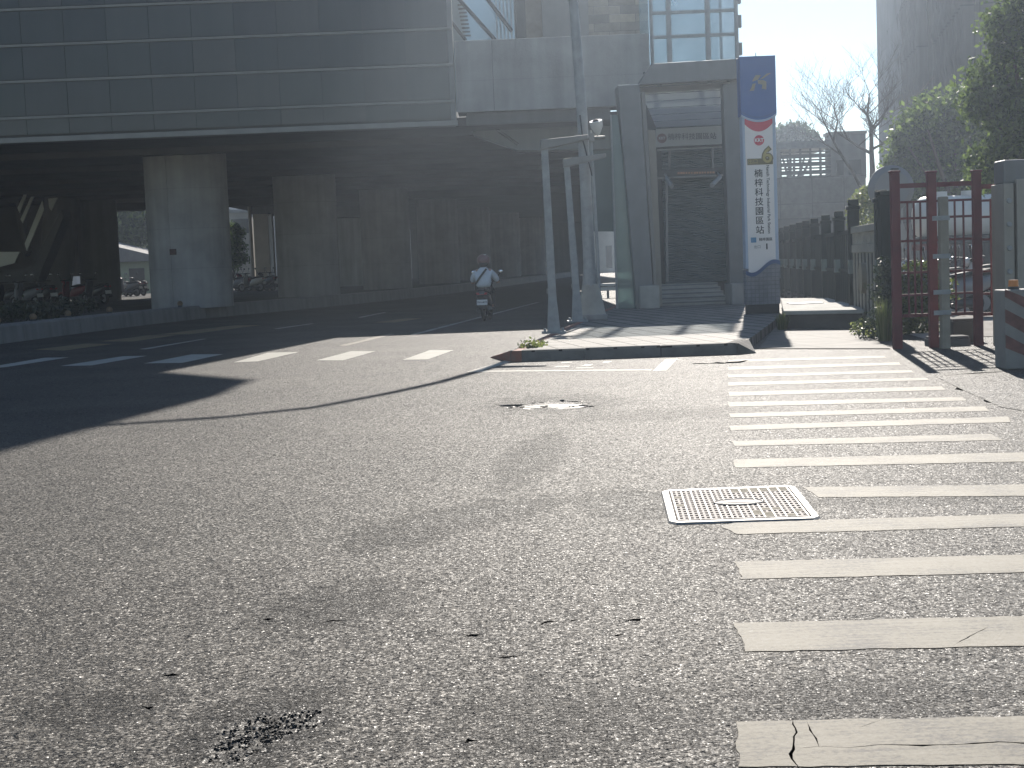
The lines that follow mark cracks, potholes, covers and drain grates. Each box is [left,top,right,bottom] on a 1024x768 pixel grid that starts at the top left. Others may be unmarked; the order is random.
crack [789,723,1024,768]
pothole [498,400,594,409]
crack [939,371,1005,403]
pothole [196,705,331,768]
